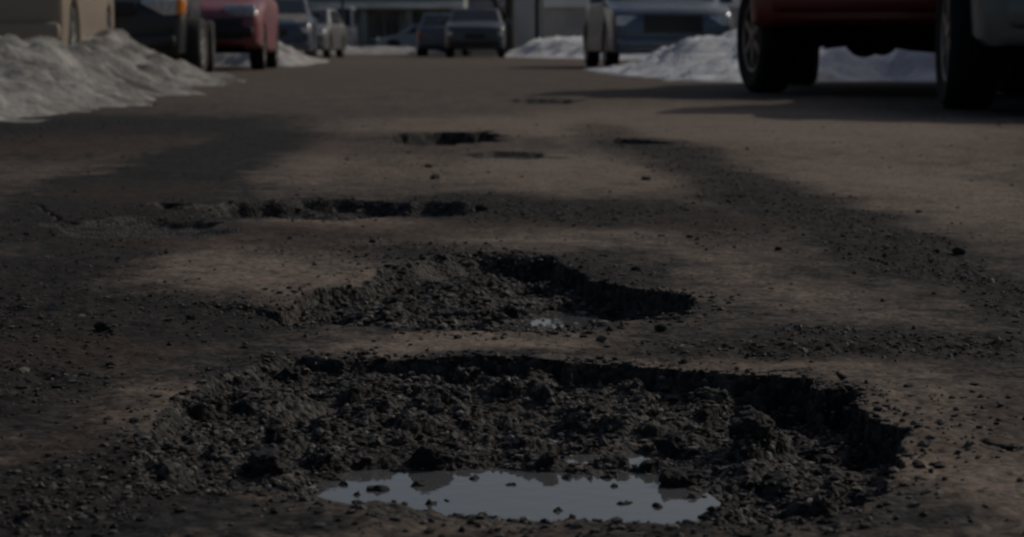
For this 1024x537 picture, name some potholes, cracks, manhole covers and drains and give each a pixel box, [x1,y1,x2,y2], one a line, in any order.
pothole [132,355,912,530]
pothole [180,198,475,221]
pothole [458,151,567,160]
pothole [376,131,511,146]
pothole [145,202,188,210]
pothole [234,252,700,333]
pothole [496,97,582,105]
